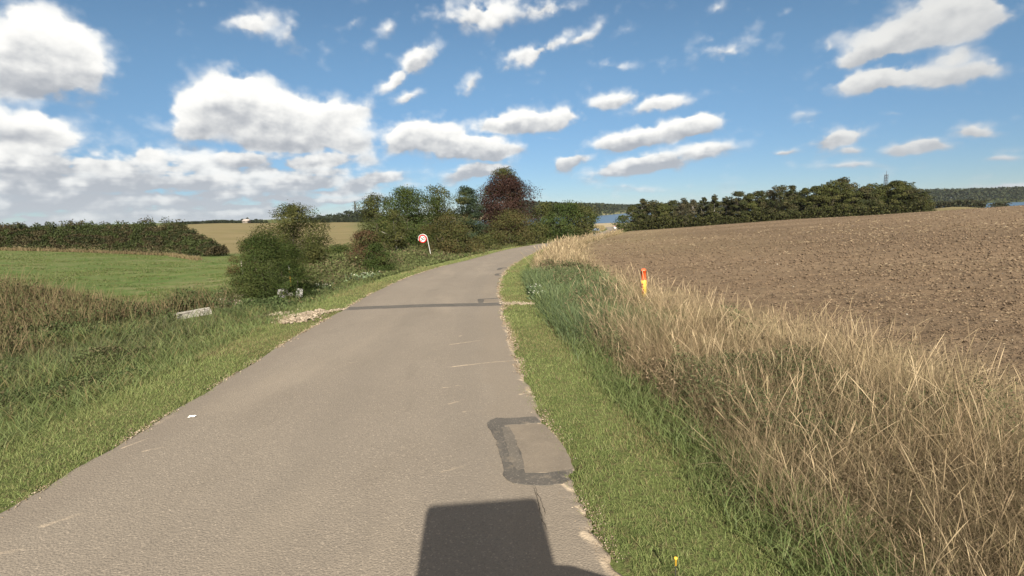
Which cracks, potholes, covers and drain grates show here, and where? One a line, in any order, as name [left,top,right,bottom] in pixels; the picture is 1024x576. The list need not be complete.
crack [534,487,547,529]
